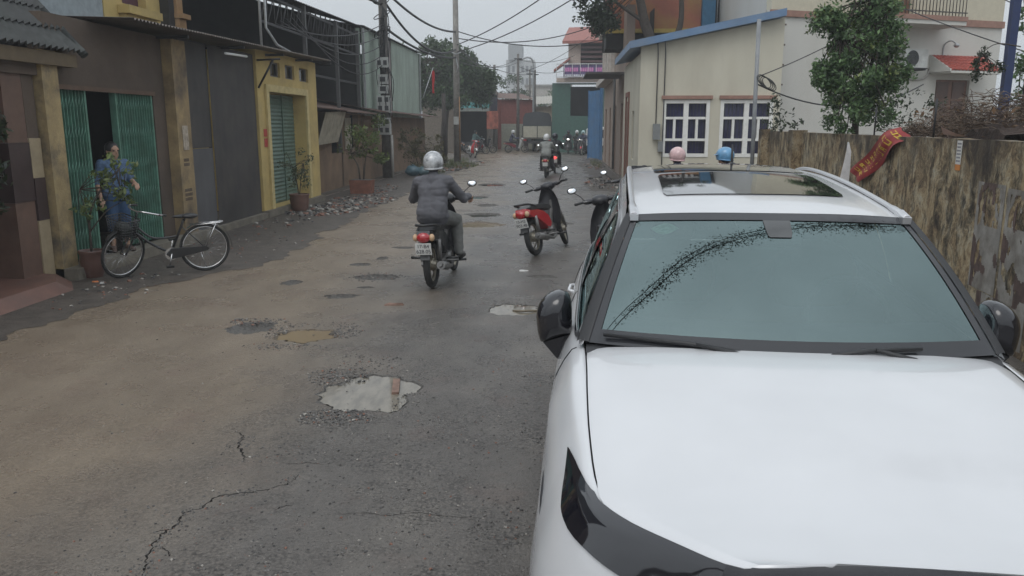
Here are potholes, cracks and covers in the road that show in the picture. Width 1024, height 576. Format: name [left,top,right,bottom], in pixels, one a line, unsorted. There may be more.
crack [237,432,246,460]
crack [142,462,323,576]
pothole [488,304,538,316]
pothole [314,374,424,413]
pothole [272,329,339,344]
pothole [224,322,276,335]
